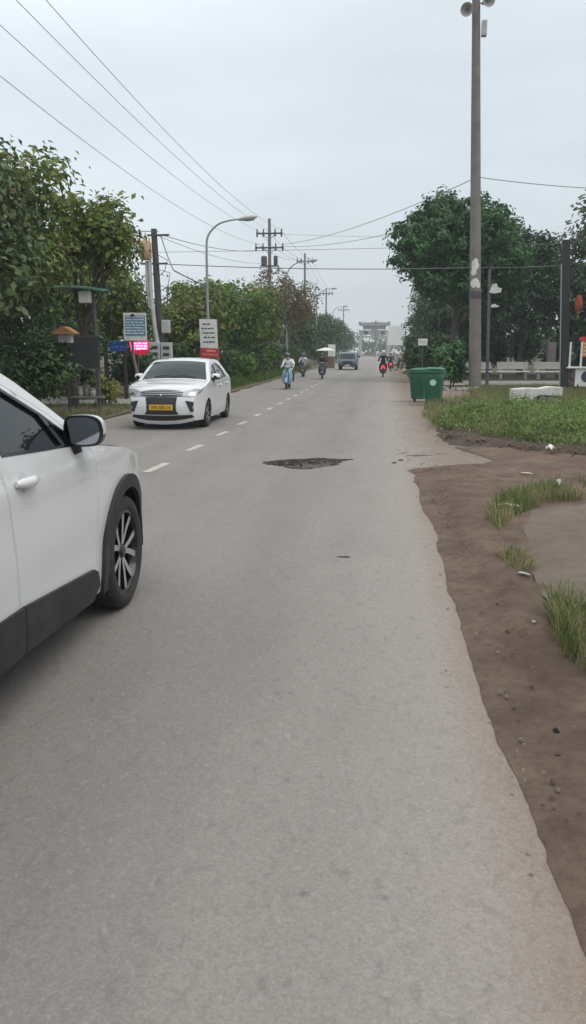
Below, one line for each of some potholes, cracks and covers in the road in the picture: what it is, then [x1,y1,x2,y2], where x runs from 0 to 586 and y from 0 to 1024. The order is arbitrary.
pothole [262,458,353,470]
